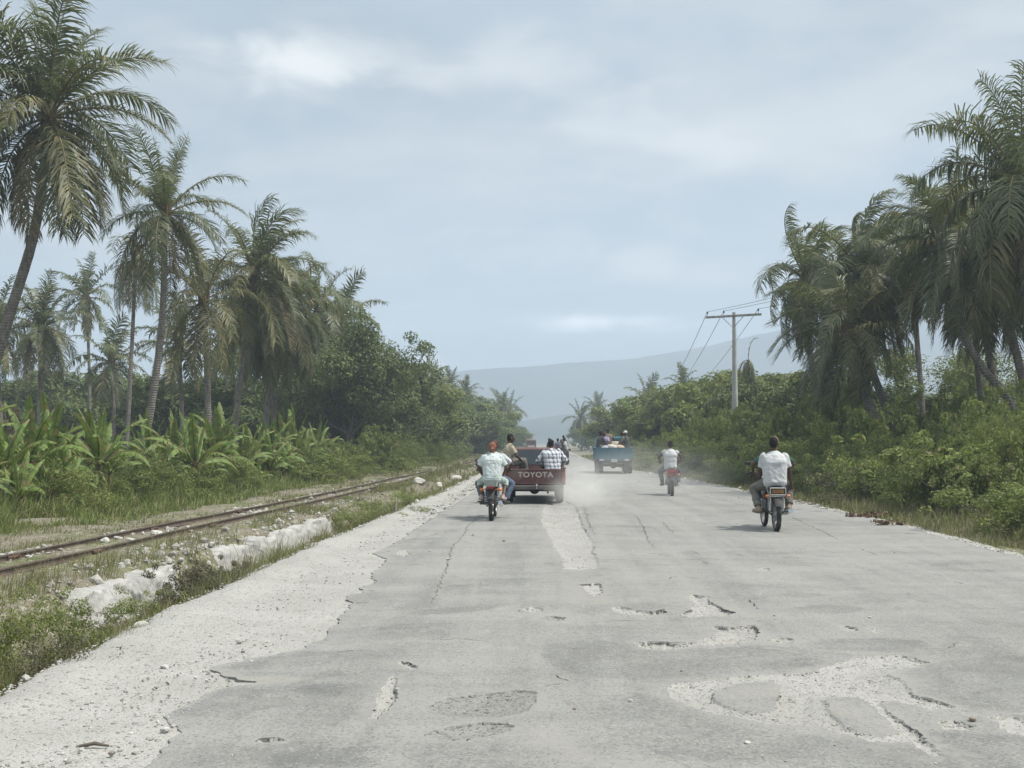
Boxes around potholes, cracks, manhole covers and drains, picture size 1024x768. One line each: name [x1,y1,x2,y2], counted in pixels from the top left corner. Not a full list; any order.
pothole [368,676,399,720]
pothole [634,625,761,651]
pothole [579,583,605,596]
pothole [540,501,600,570]
pothole [679,594,736,617]
pothole [611,606,667,615]
pothole [666,655,957,757]
